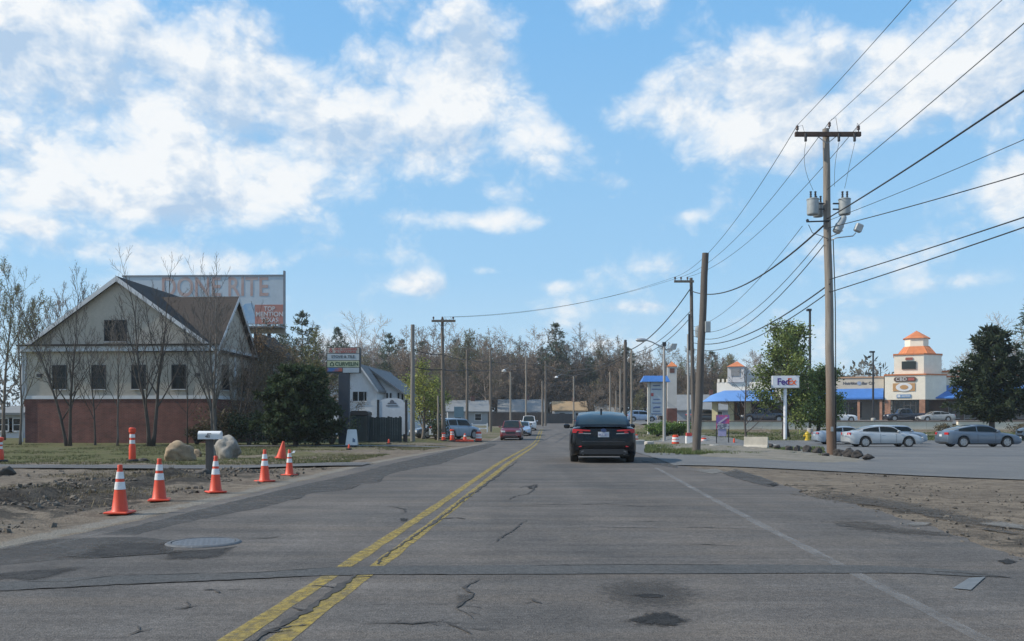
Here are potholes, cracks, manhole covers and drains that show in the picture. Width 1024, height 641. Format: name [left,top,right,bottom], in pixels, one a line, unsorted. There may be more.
utility cover [954,577,984,590]
manhole cover [165,537,242,548]
